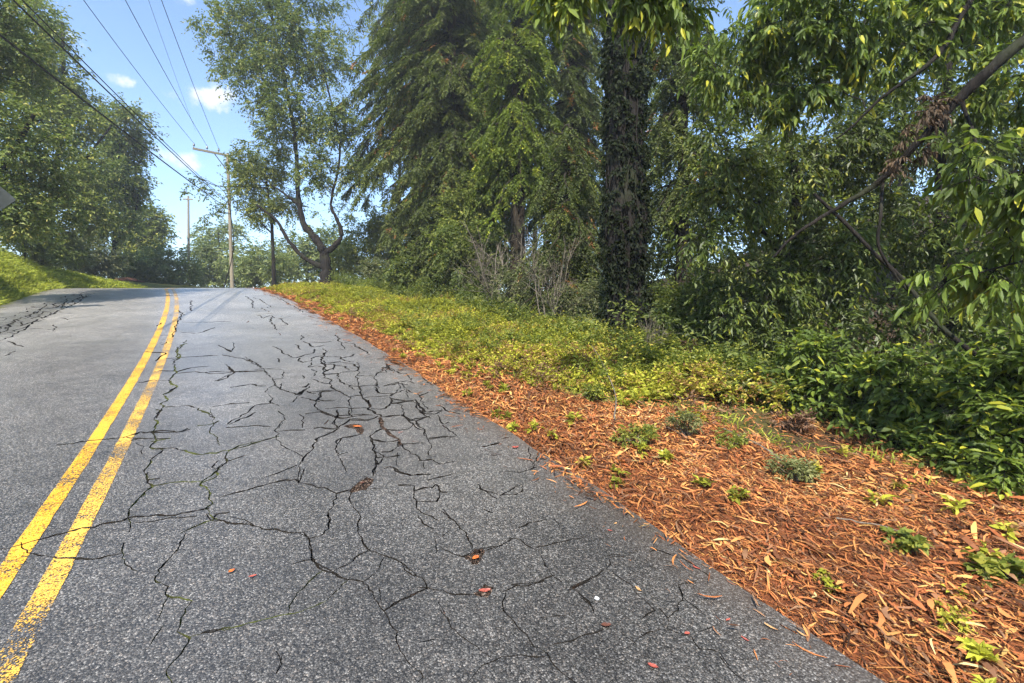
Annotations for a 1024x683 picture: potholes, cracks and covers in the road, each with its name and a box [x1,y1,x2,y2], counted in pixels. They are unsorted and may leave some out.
pothole [348,477,374,495]
crack [0,300,846,683]
